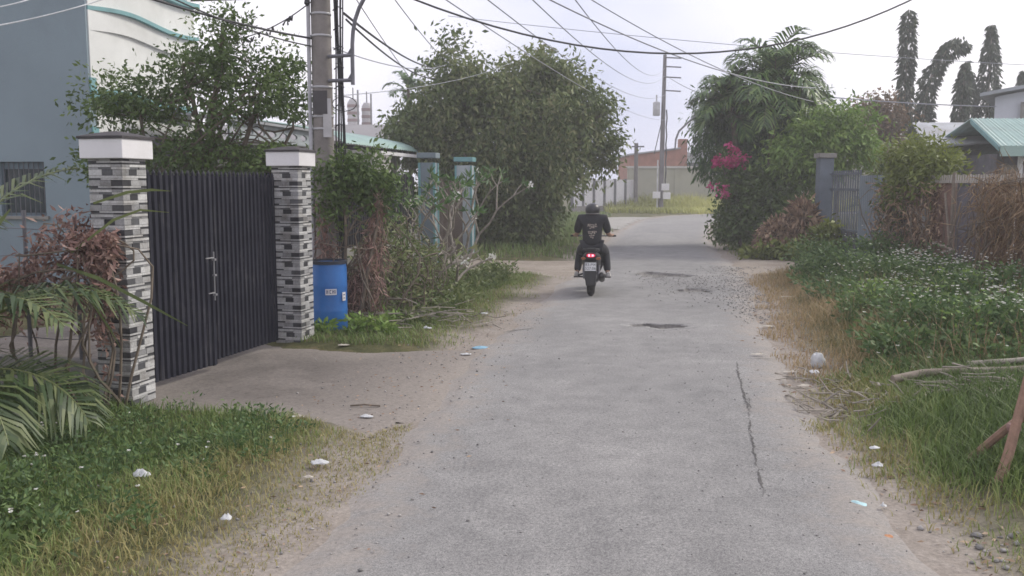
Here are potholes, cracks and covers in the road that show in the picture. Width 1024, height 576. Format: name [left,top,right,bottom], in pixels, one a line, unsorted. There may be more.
crack [736,358,764,495]
pothole [615,322,702,330]
